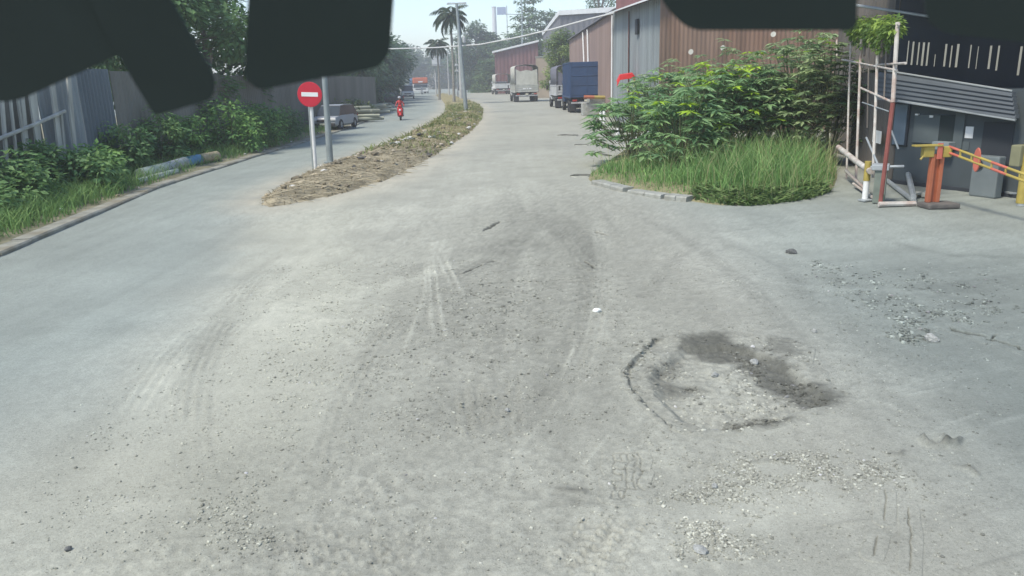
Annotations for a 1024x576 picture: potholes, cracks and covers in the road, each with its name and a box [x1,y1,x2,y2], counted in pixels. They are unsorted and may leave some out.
crack [859,484,924,576]
pothole [619,329,858,438]
crack [935,323,1024,356]
crack [465,218,517,235]
